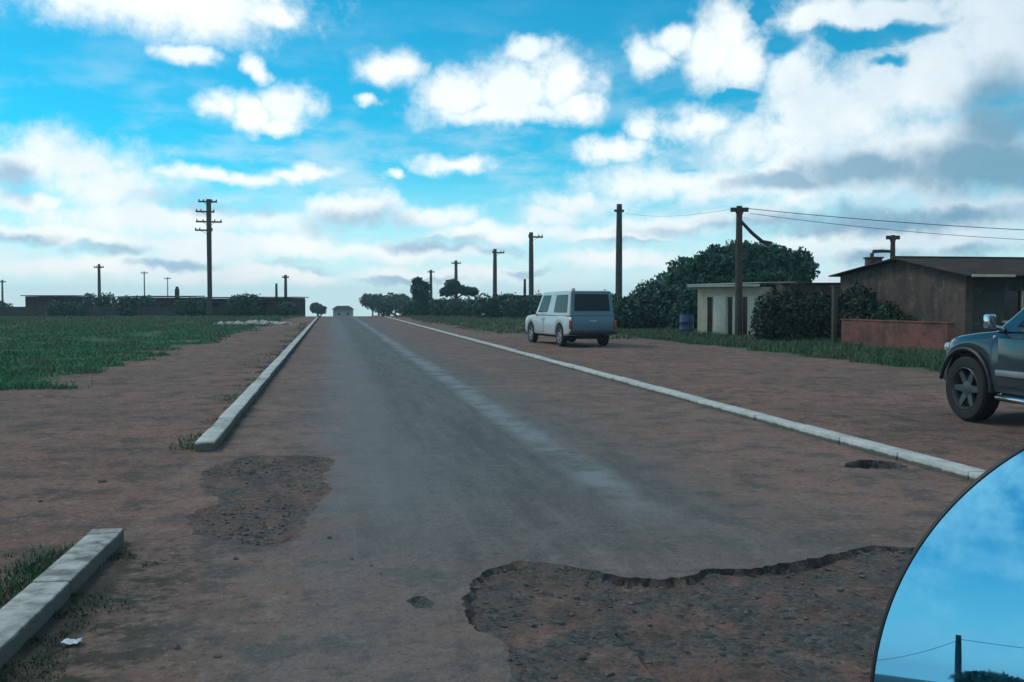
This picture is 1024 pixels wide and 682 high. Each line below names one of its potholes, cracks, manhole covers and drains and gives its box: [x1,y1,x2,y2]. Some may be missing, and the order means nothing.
pothole [184,455,336,546]
pothole [407,596,435,609]
pothole [844,460,907,469]
pothole [461,545,915,682]
